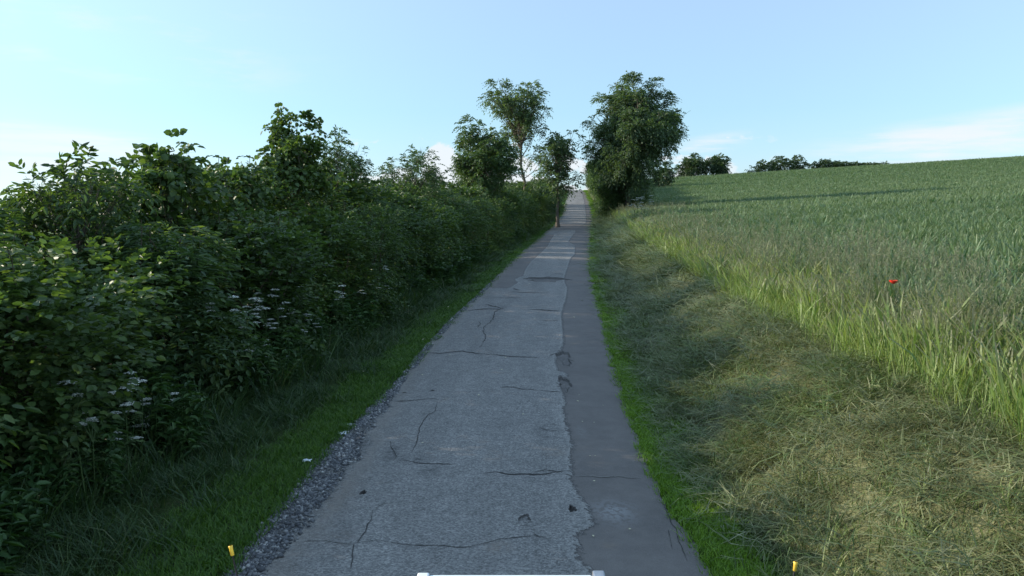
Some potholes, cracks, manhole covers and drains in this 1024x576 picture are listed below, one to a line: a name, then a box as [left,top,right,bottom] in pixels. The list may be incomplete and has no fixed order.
crack [308,503,558,565]
crack [390,390,449,471]
pothole [561,502,584,515]
pothole [551,349,575,368]
crack [422,288,573,361]
pothole [510,511,539,526]
pothole [554,374,577,395]
